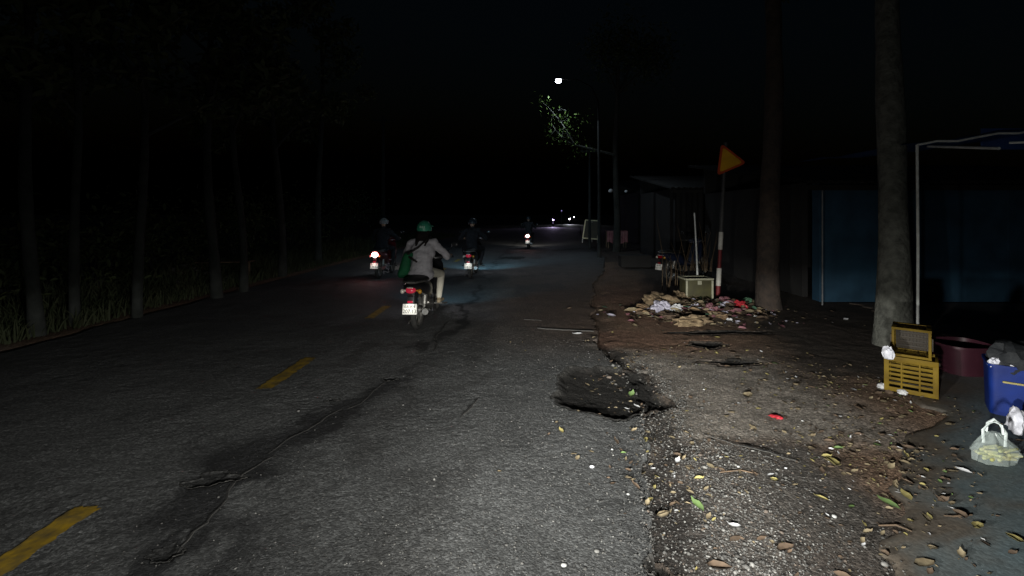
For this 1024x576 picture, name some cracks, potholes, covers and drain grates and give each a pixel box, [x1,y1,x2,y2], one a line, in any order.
crack [705,435,800,463]
crack [168,379,393,561]
pothole [697,359,767,367]
pothole [551,365,675,421]
crack [460,399,478,418]
pothole [687,340,730,350]
